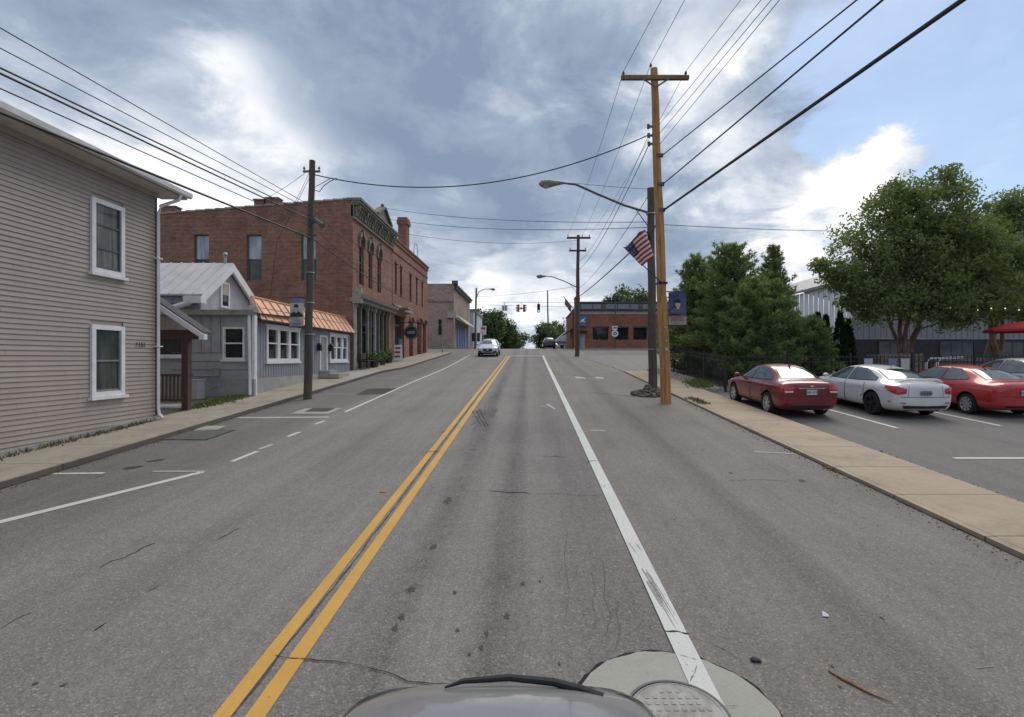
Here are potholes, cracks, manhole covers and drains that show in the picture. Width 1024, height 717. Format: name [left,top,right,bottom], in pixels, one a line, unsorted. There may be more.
crack [592,563,621,647]
manhole cover [578,650,784,717]
crack [277,655,448,684]
